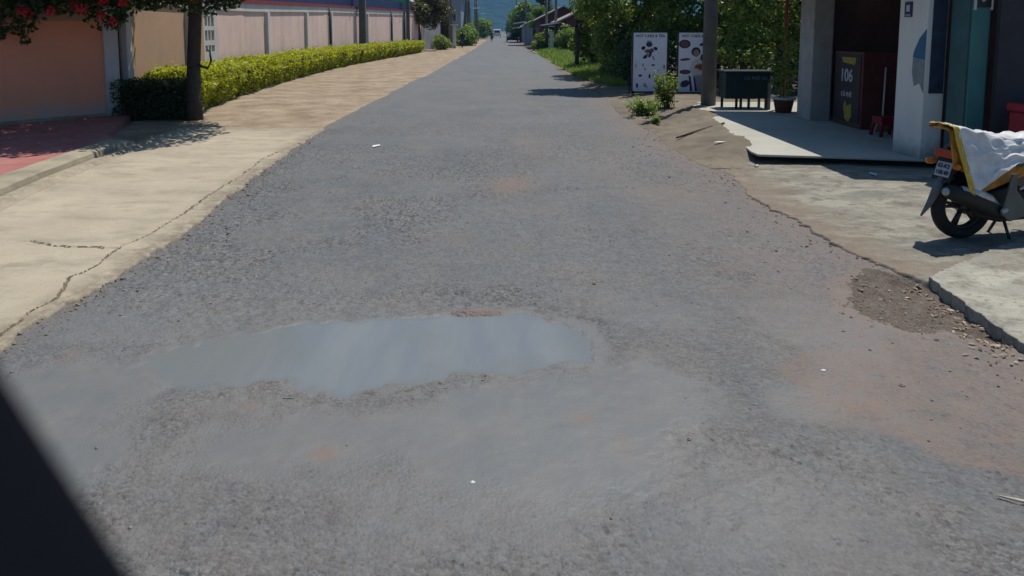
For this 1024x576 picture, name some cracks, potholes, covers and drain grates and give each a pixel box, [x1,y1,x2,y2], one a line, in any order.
pothole [842,268,1012,351]
pothole [124,306,596,404]
